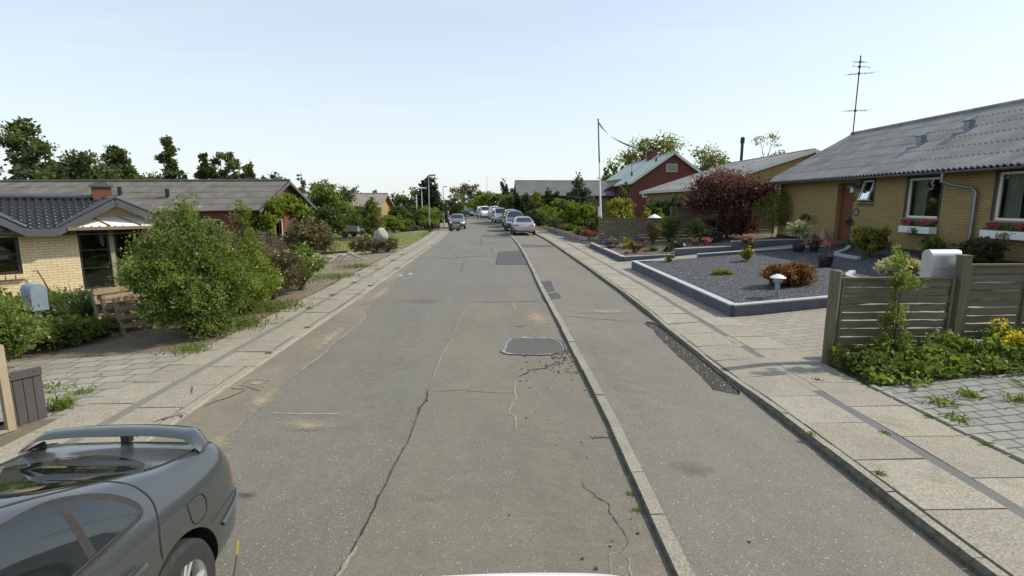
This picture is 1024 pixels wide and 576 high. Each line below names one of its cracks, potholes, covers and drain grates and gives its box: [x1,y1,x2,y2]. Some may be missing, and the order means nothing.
crack [447,364,555,432]
crack [581,480,633,576]
manhole cover [239,378,272,391]
